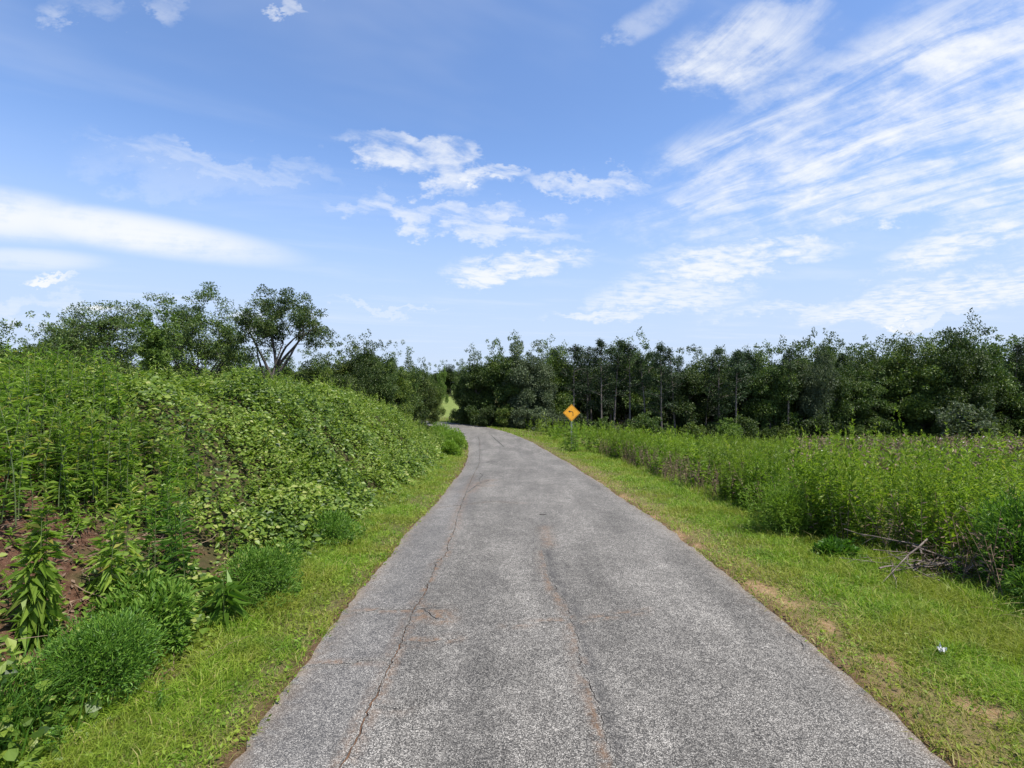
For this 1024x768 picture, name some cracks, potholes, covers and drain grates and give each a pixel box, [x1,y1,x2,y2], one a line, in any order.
crack [339,443,486,768]
